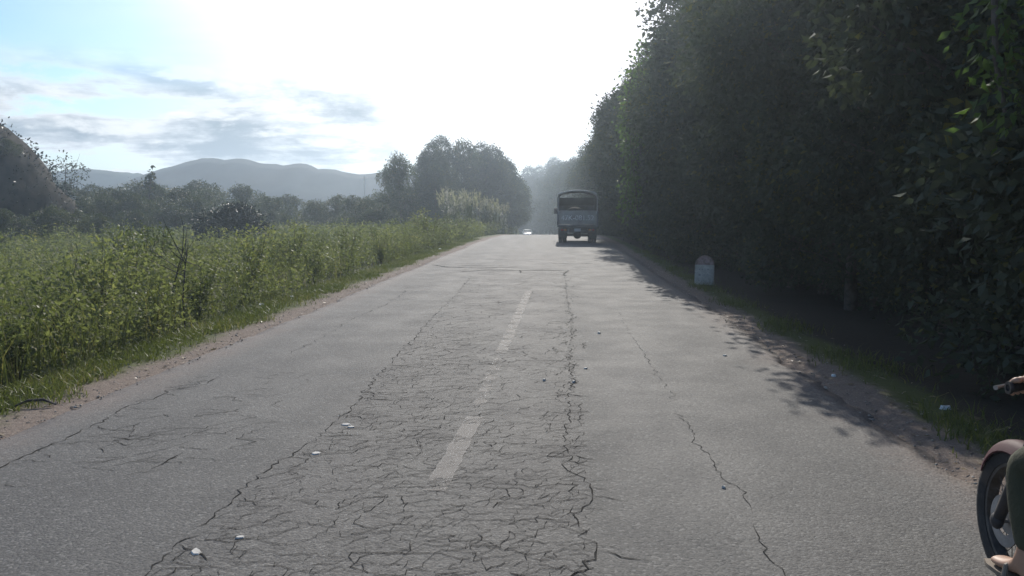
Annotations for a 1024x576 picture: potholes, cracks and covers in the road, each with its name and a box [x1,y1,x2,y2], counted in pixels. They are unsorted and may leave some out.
crack [0,370,309,487]
crack [619,312,786,576]
crack [145,270,652,576]
